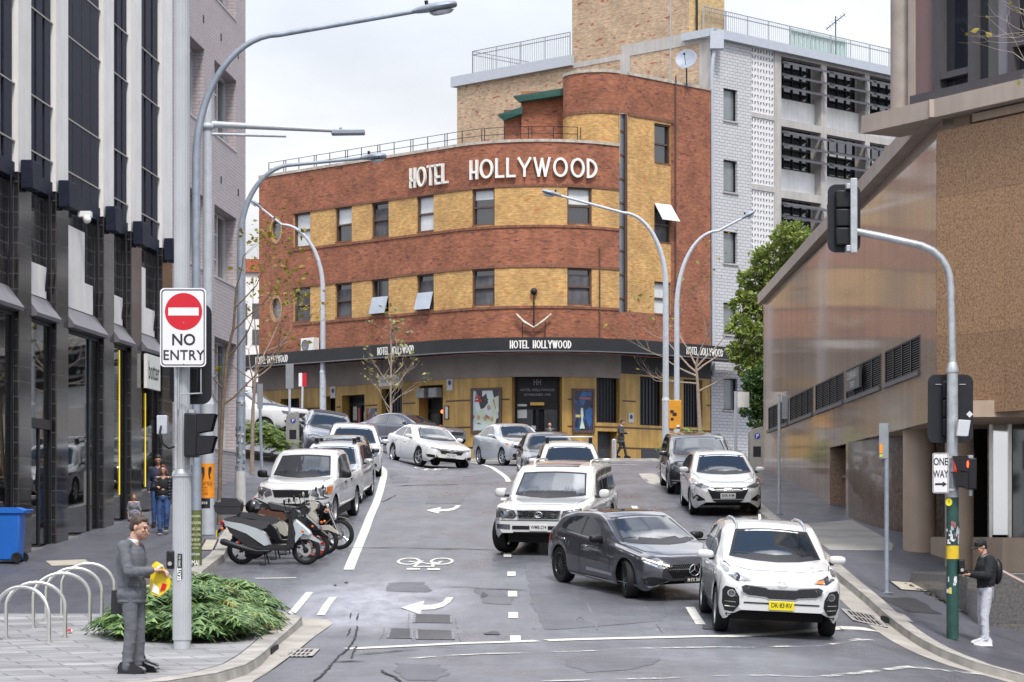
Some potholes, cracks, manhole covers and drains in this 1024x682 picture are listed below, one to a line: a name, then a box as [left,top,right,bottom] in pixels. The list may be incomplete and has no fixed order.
drain grate [841,608,888,628]
crack [313,613,416,681]
drain grate [276,648,320,657]
